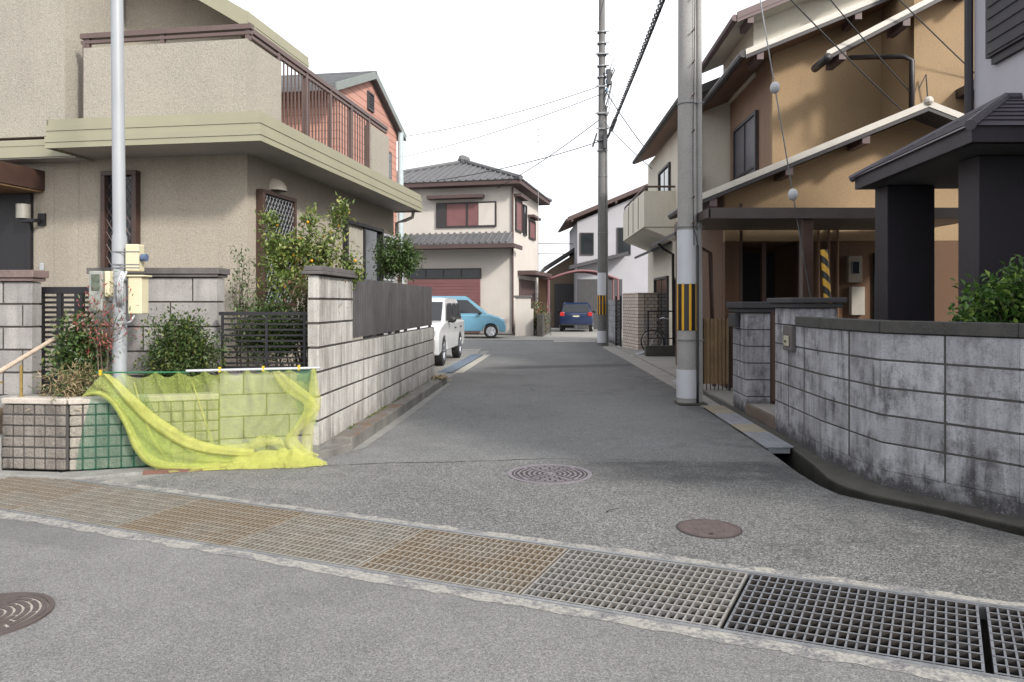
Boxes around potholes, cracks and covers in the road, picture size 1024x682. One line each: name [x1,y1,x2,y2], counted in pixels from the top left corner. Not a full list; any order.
drain grate [724,574,985,673]
manhole cover [508,464,592,484]
drain grate [521,549,748,629]
drain grate [113,499,305,546]
drain grate [986,605,1024,679]
drain grate [226,513,424,568]
manhole cover [676,519,743,539]
drain grate [356,529,568,595]
drain grate [13,486,202,527]
manhole cover [0,592,55,636]
drain grate [0,476,108,510]
